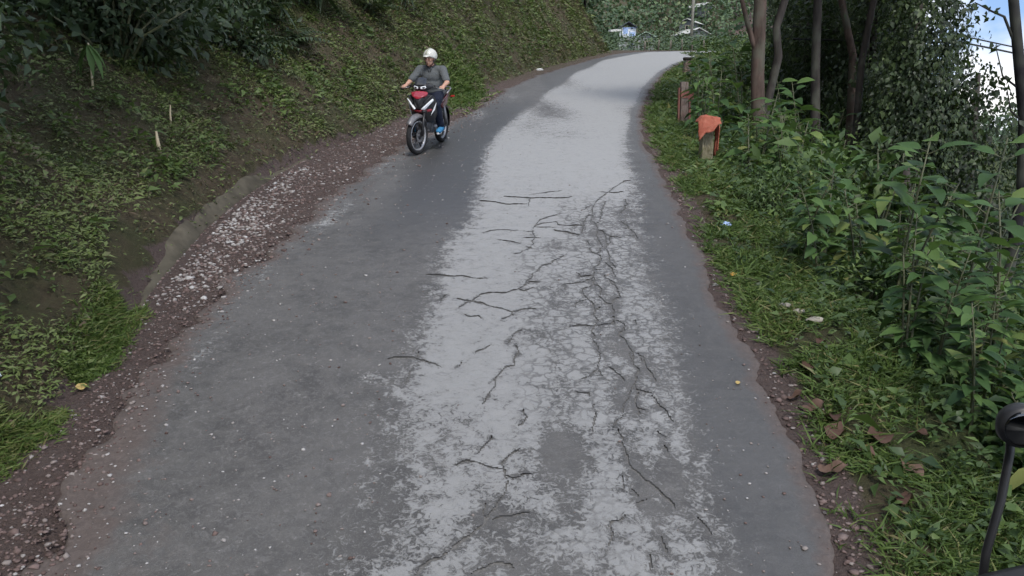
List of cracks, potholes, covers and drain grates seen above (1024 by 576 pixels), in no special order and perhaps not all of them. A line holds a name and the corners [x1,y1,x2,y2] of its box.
crack [427,181,675,546]
crack [389,353,441,383]
crack [415,438,530,576]
crack [649,536,668,571]
